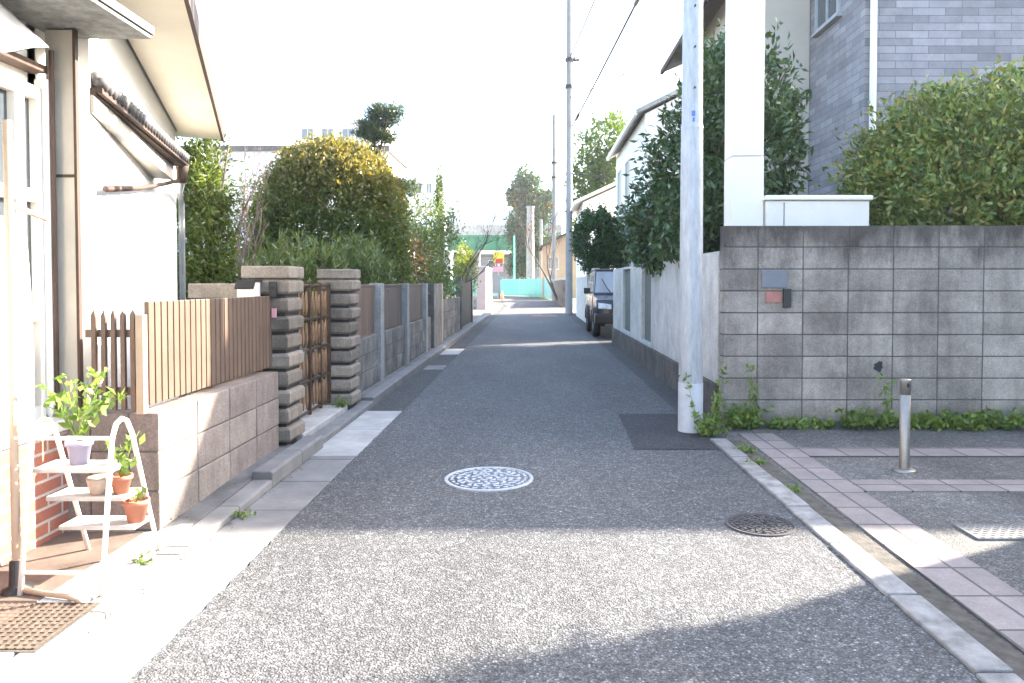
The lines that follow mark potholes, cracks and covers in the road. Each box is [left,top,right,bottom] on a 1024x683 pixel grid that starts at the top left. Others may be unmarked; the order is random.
manhole cover [725,513,797,537]
manhole cover [444,467,533,492]
